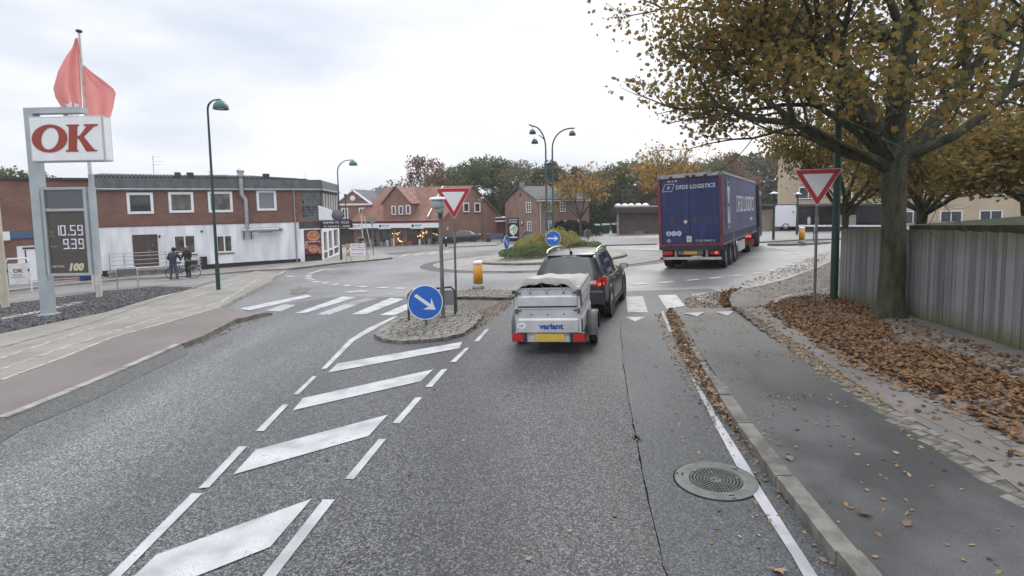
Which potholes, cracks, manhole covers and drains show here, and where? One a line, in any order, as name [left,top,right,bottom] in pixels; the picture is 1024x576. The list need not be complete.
manhole cover [673,461,761,502]
crack [620,328,668,576]
